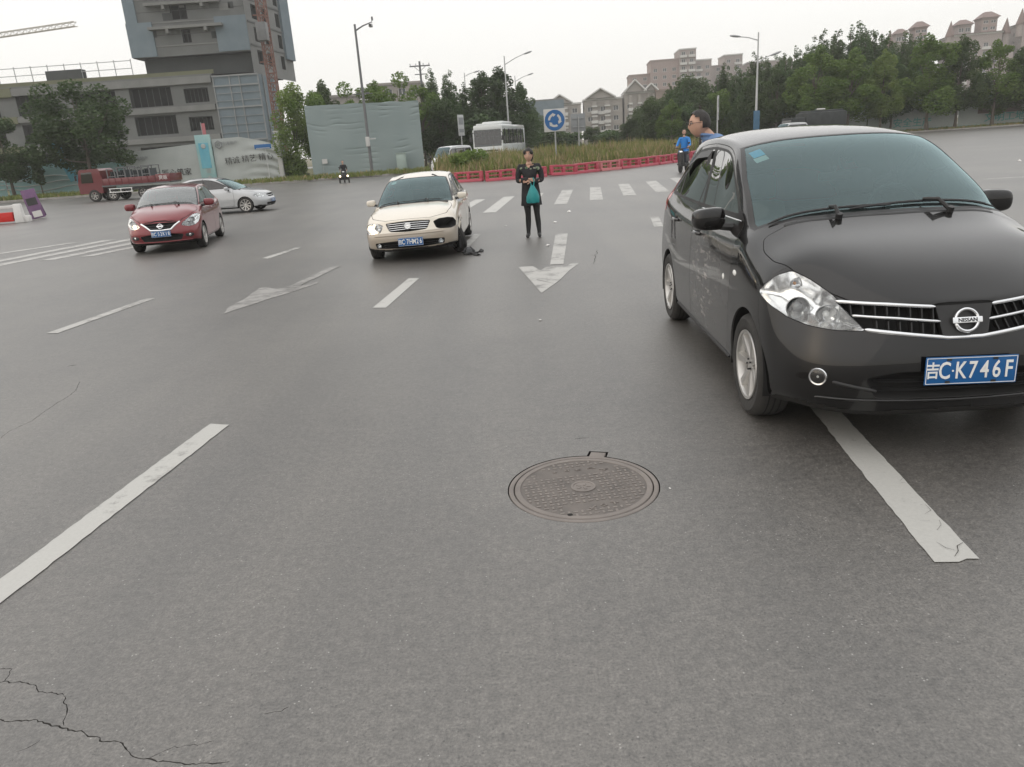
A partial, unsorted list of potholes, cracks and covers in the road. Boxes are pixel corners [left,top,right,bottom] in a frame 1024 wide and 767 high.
manhole cover [508,451,660,523]
crack [0,668,229,765]
